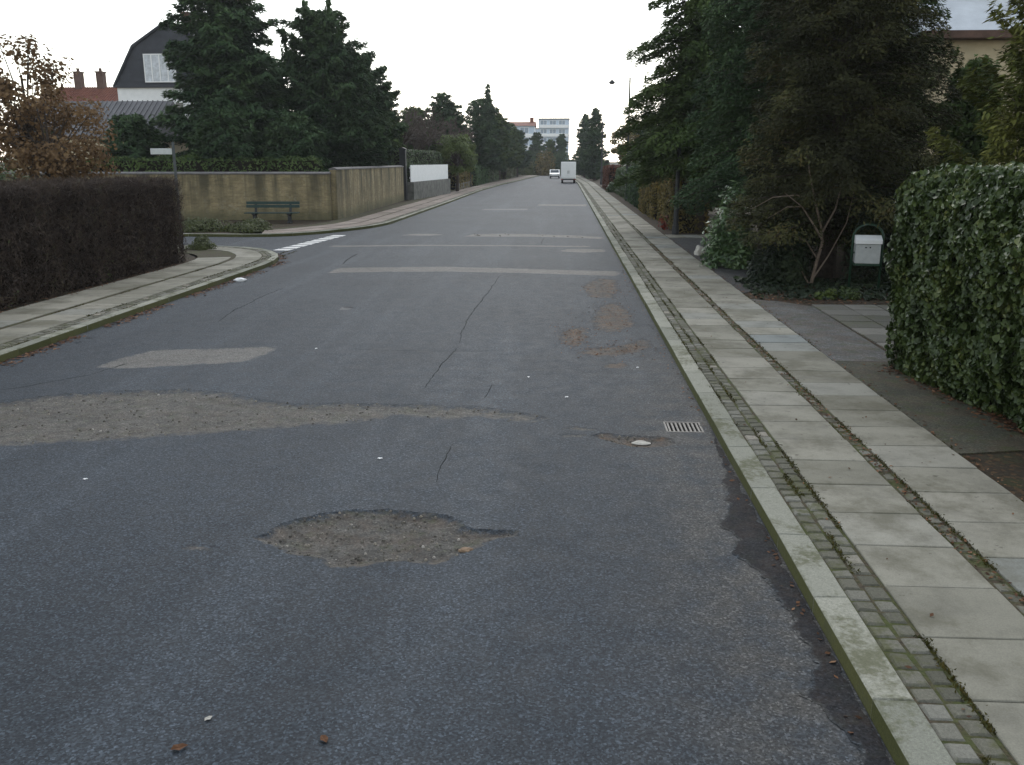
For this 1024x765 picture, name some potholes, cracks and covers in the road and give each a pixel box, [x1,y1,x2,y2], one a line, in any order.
pothole [591,432,677,448]
crack [425,278,498,387]
pothole [557,326,591,347]
pothole [252,508,521,568]
pothole [575,338,653,357]
pothole [0,388,550,447]
drain grate [663,422,705,433]
pothole [581,278,622,298]
pothole [588,302,637,333]
